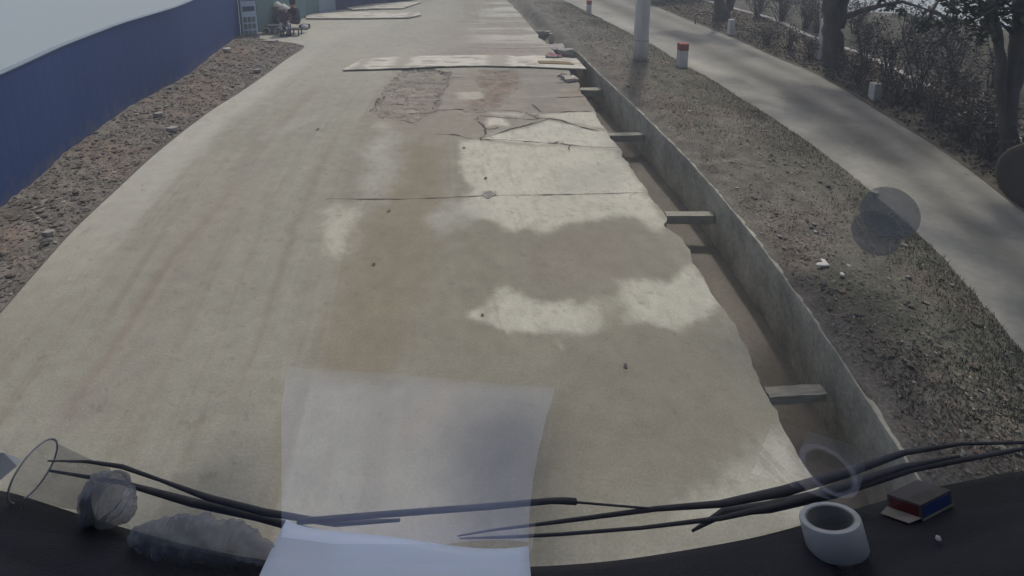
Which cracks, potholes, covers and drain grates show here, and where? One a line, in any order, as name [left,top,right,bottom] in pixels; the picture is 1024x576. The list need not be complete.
pothole [371,69,451,121]
crack [369,71,617,150]
